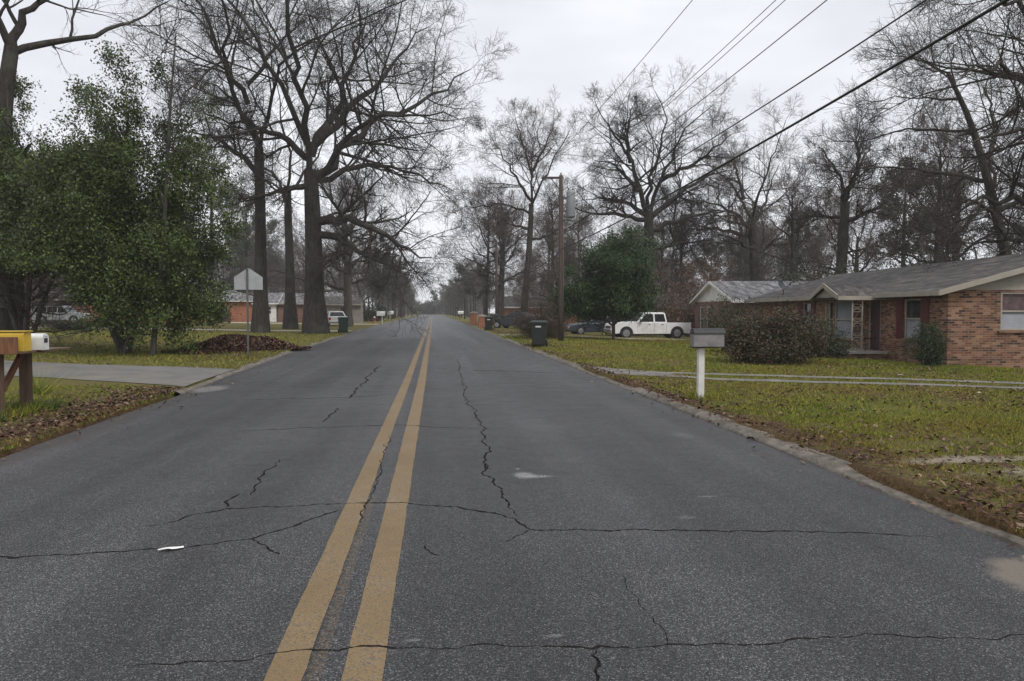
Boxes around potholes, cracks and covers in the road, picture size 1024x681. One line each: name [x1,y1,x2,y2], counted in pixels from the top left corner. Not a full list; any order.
crack [0,509,343,559]
crack [140,360,938,541]
crack [134,578,1024,681]
